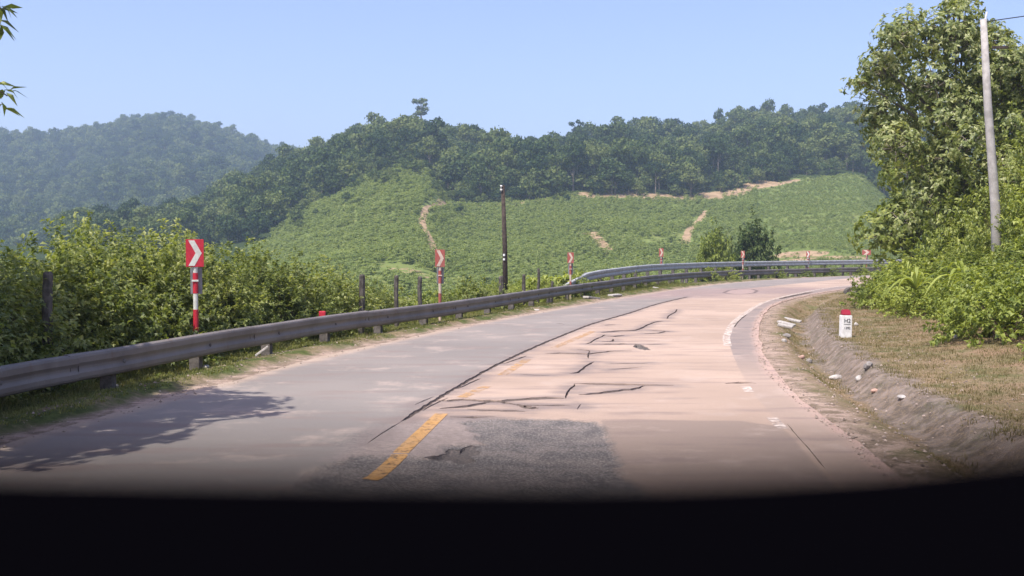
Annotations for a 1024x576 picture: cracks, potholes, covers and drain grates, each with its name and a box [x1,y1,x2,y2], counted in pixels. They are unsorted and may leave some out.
crack [442,310,677,418]
